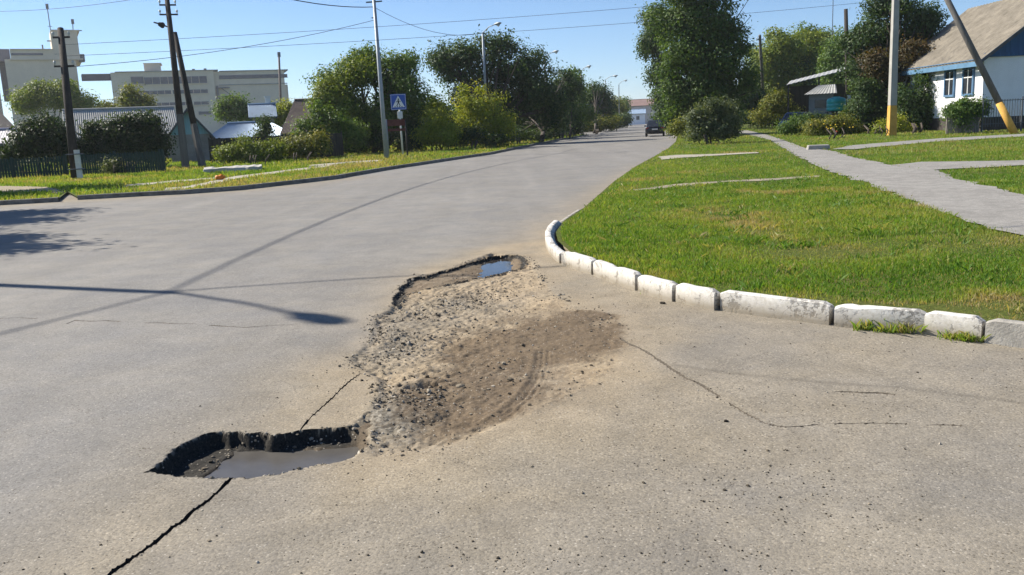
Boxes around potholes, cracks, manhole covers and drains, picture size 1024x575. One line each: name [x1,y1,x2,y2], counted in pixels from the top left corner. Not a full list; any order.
crack [620,338,962,428]
pothole [392,255,527,307]
pothole [145,413,373,479]
crack [22,317,293,328]
crack [107,477,233,575]
crack [300,373,360,430]
